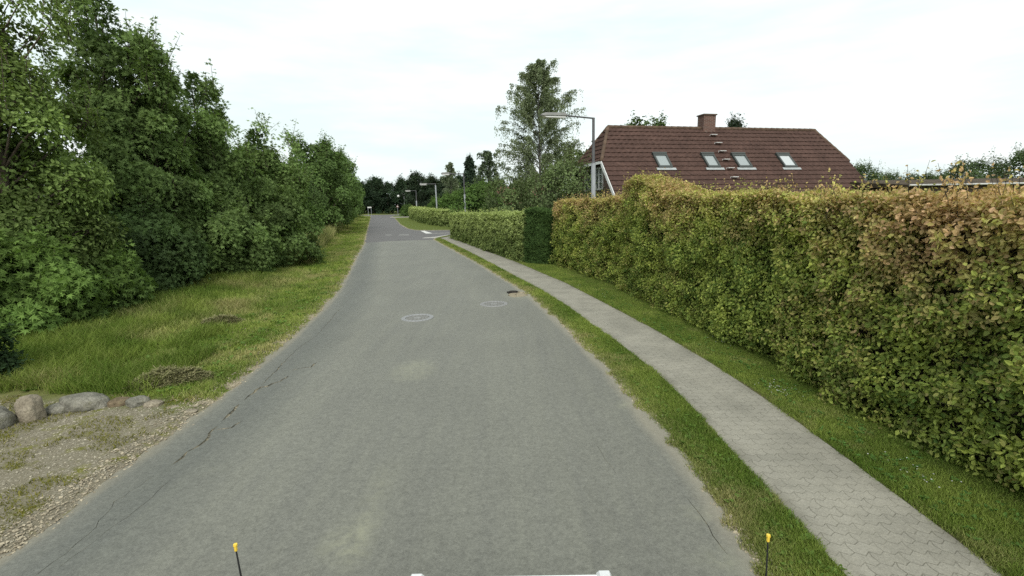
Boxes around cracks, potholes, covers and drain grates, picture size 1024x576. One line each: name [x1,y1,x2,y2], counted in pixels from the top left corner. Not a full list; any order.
crack [35,476,168,576]
manhole cover [401,314,434,322]
crack [172,309,340,465]
